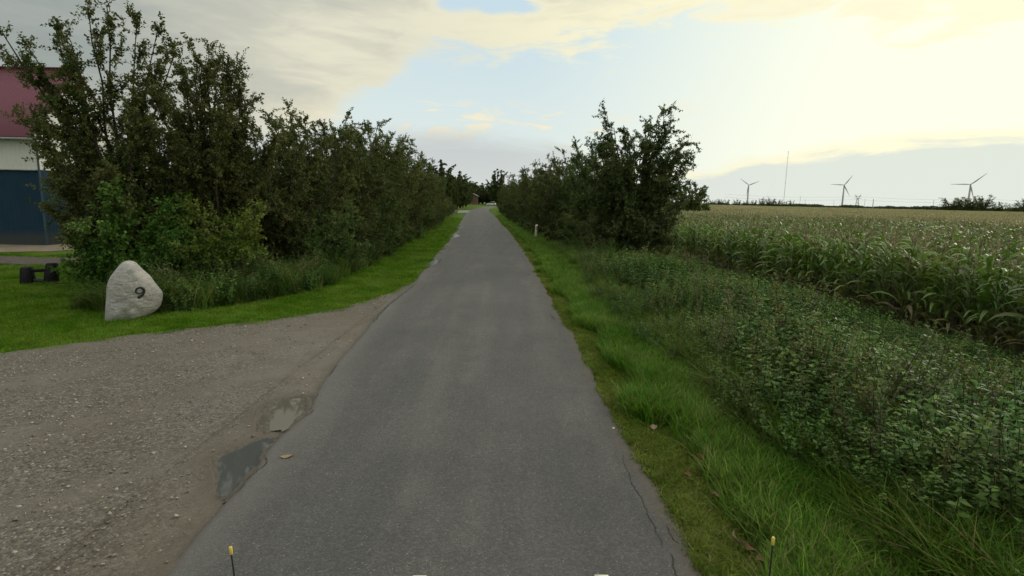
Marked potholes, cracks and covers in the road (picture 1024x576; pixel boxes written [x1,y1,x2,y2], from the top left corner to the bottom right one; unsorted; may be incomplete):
crack [622,456,679,576]
pothole [255,393,315,438]
pothole [210,435,280,504]
